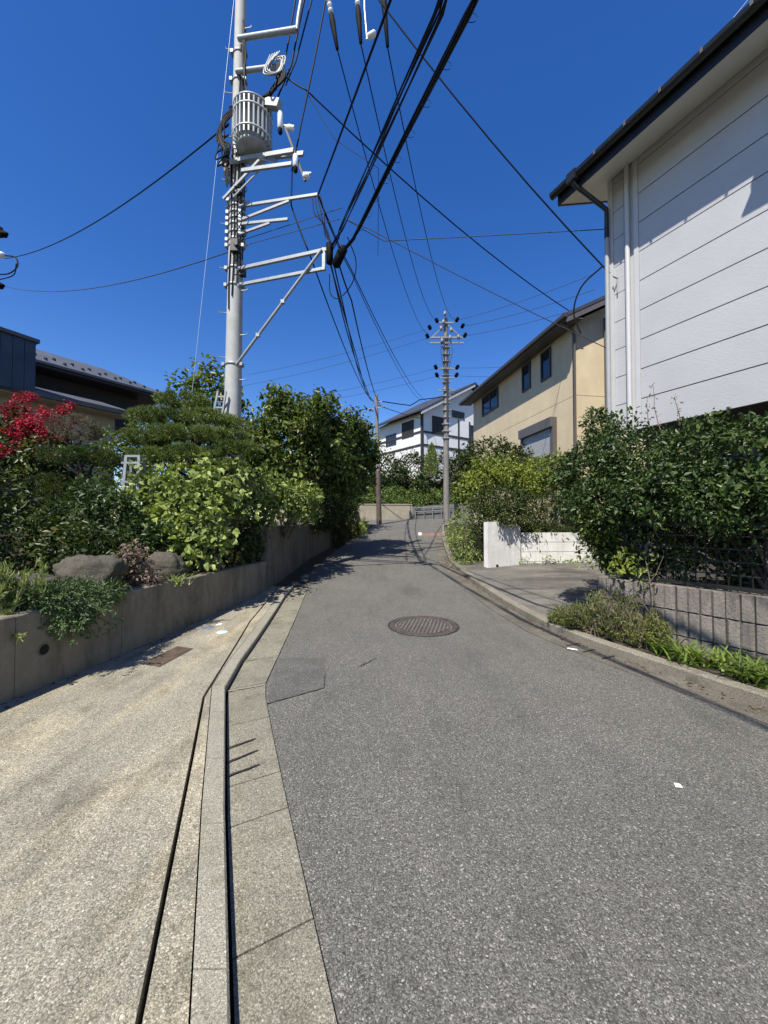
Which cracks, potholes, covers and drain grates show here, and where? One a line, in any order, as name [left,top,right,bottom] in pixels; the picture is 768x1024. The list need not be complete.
manhole cover [388,616,460,637]
